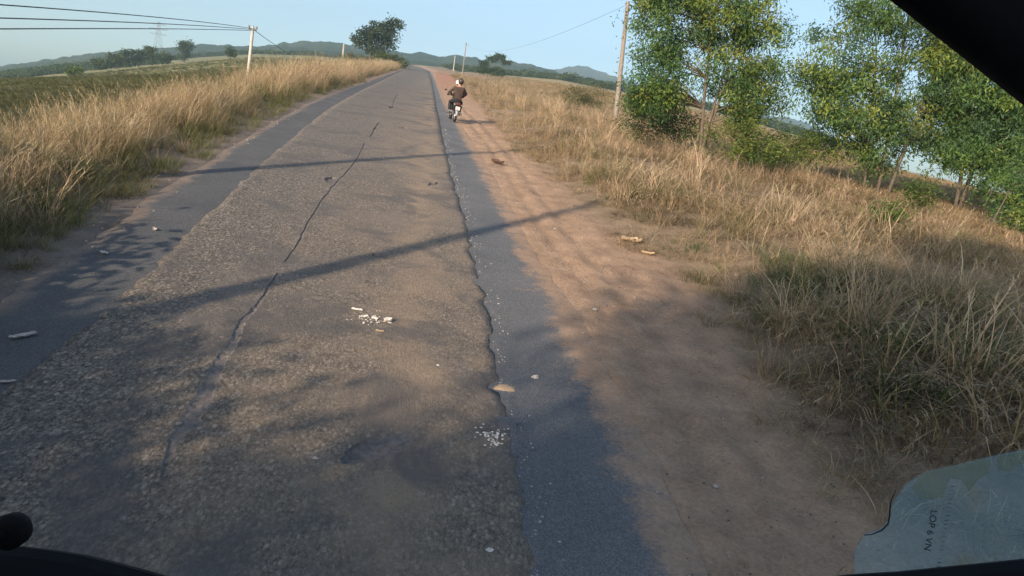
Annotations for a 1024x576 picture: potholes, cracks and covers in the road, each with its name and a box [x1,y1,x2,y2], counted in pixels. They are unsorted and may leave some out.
pothole [339,431,413,465]
